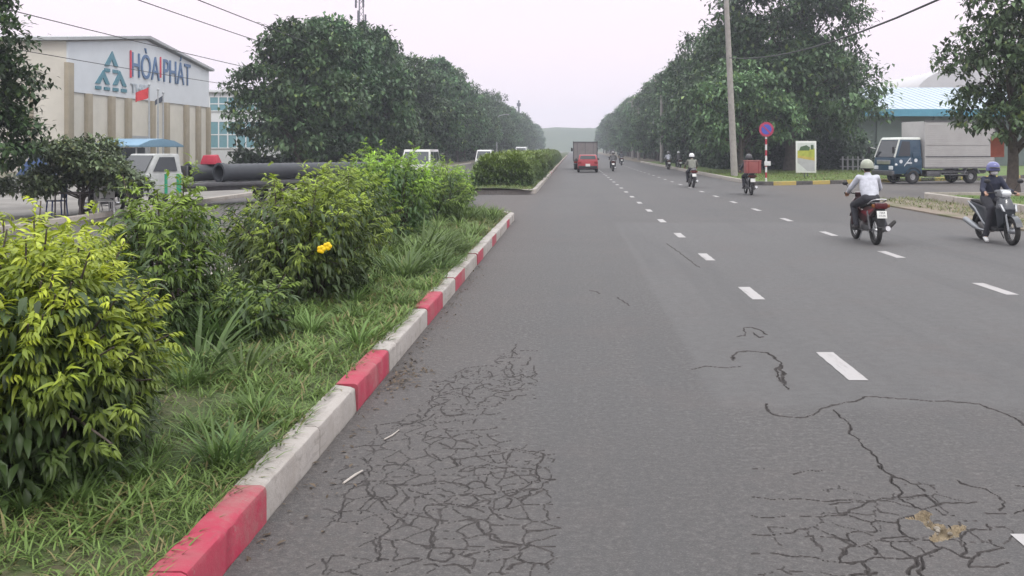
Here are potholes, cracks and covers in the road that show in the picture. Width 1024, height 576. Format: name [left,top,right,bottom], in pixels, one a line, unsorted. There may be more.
pothole [906,510,966,542]
crack [691,327,1024,576]
